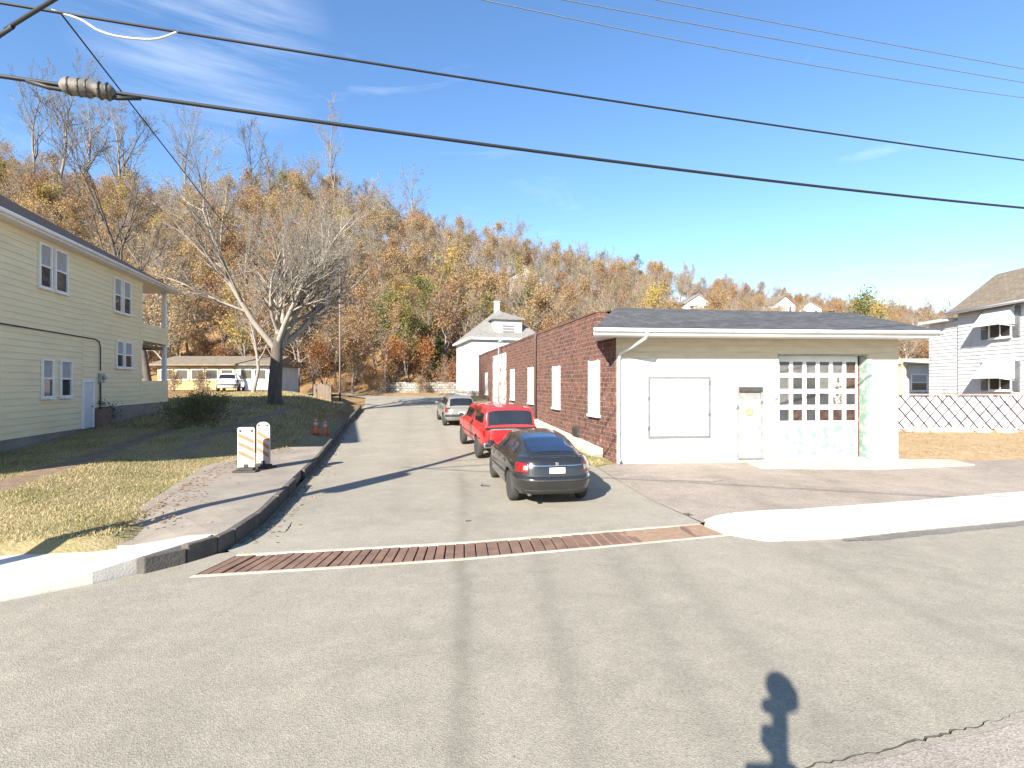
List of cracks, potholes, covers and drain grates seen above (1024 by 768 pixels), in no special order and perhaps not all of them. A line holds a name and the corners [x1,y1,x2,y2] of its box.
crack [806,711,1022,768]
